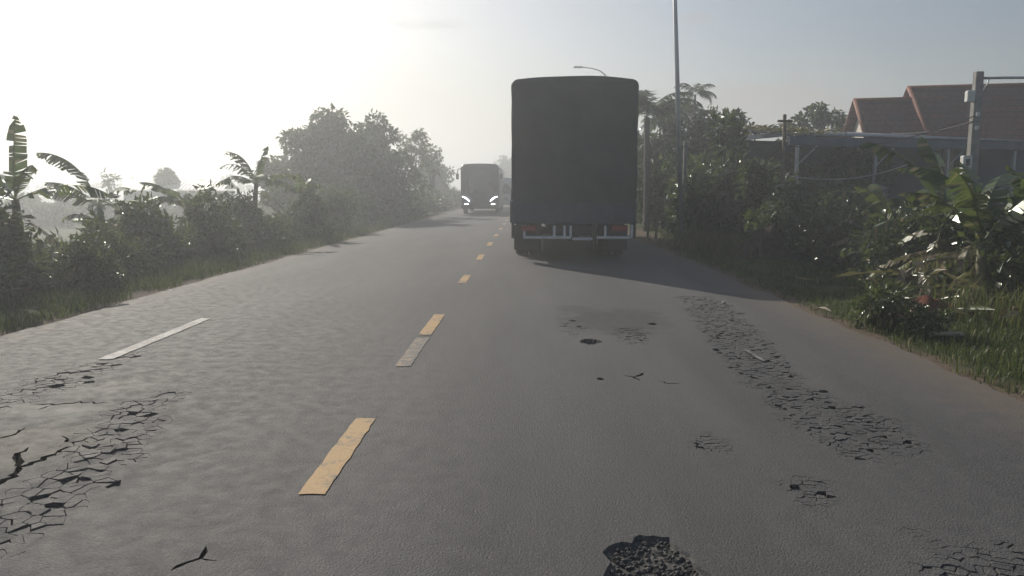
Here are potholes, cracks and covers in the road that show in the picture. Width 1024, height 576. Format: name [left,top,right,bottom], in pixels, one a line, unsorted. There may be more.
pothole [603,535,712,576]
crack [0,351,217,571]
crack [556,295,932,509]
